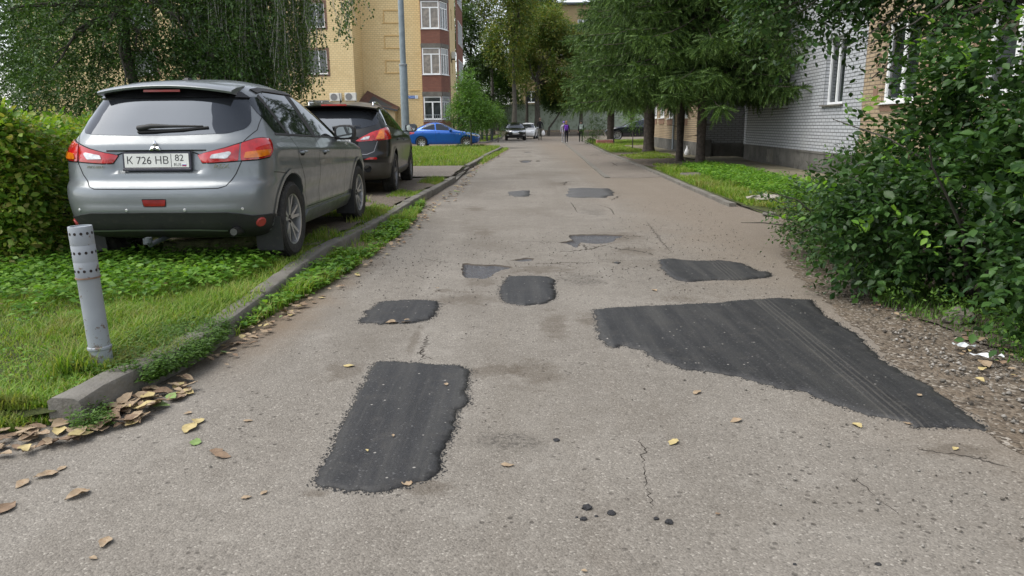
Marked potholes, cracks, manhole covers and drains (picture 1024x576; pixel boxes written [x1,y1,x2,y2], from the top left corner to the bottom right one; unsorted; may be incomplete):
crack [918,448,1012,468]
crack [638,439,654,510]
crack [417,335,434,361]
